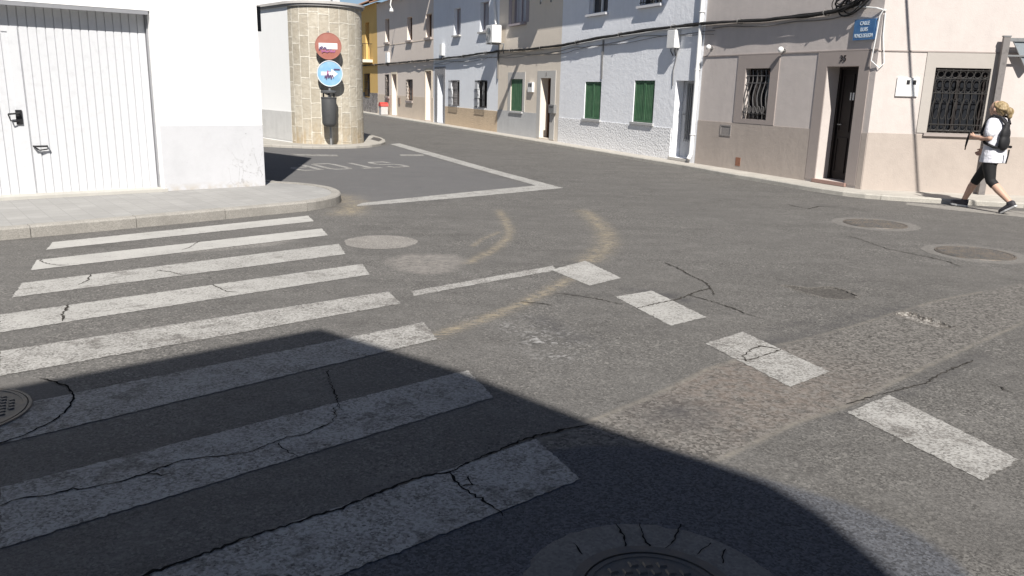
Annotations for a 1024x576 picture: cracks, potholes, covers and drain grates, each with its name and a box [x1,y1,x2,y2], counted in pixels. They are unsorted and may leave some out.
manhole cover [921,244,1024,264]
pothole [890,311,962,330]
crack [846,360,973,404]
crack [141,424,589,576]
crack [741,345,781,361]
crack [638,263,760,318]
crack [616,523,726,563]
crack [0,371,342,506]
manhole cover [831,217,921,231]
manhole cover [523,524,774,576]
